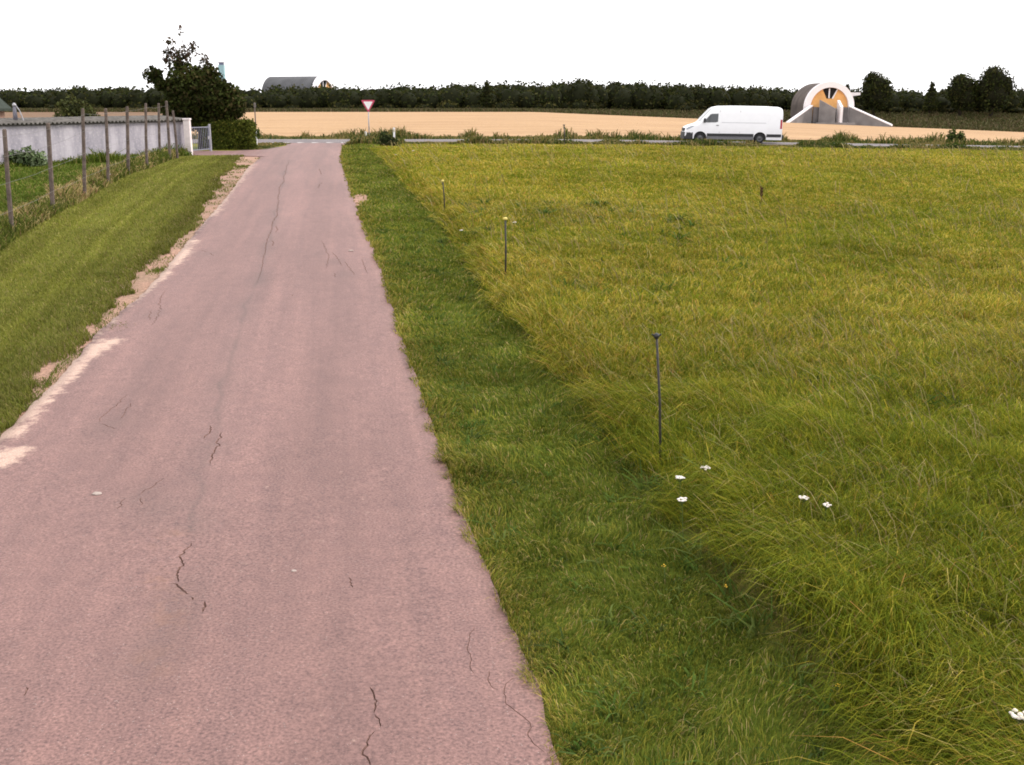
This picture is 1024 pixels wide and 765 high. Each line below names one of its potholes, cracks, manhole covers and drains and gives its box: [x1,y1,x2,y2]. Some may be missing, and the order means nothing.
crack [204,426,222,464]
crack [361,686,381,765]
crack [173,543,207,613]
crack [257,163,289,282]
crack [466,626,544,752]
